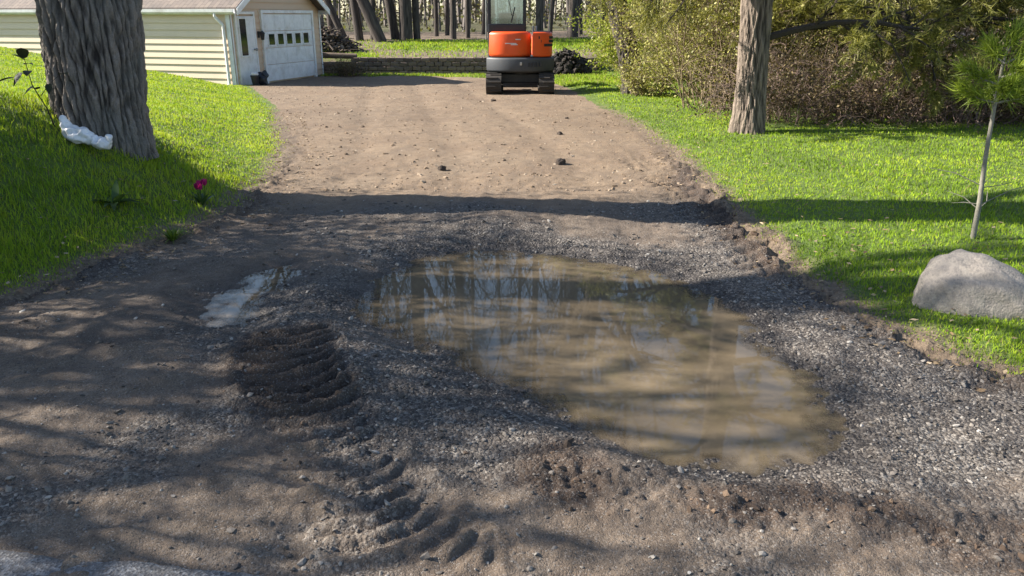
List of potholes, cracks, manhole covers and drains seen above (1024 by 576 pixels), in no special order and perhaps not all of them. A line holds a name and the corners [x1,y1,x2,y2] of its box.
pothole [179,257,312,331]
pothole [322,238,885,483]
